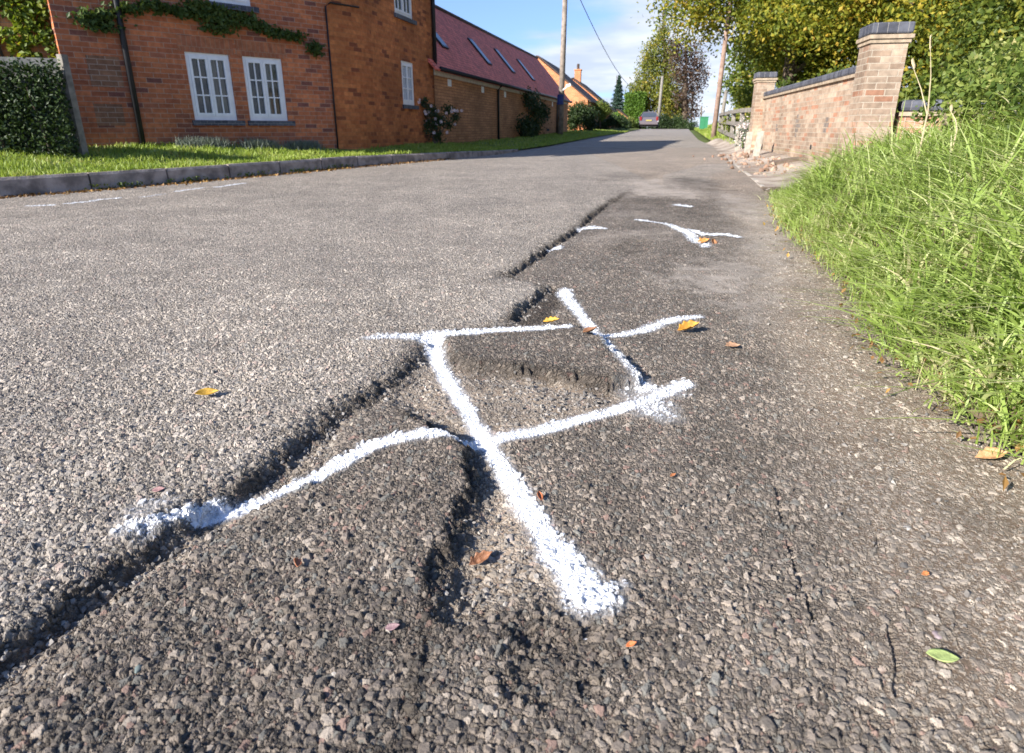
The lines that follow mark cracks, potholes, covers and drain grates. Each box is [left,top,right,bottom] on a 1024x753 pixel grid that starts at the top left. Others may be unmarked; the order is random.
crack [774,484,816,624]
pothole [511,286,565,326]
crack [224,481,262,505]
crack [508,198,620,276]
crack [886,623,903,698]
